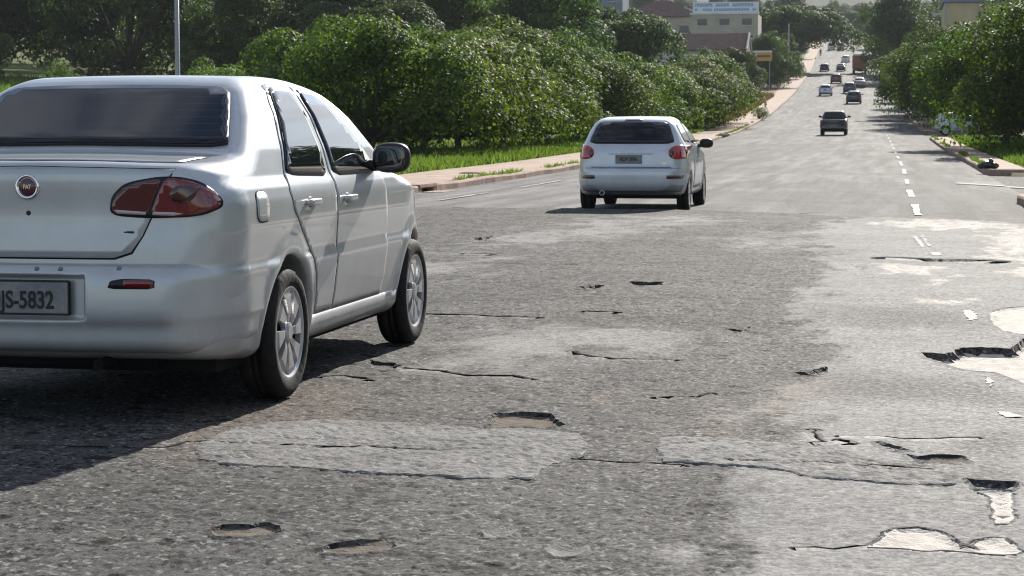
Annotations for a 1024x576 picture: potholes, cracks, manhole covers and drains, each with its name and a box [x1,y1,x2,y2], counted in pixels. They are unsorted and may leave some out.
pothole [482,412,568,430]
pothole [964,478,1023,492]
crack [564,351,675,362]
crack [562,458,682,468]
crack [402,368,532,380]
pothole [202,522,290,541]
pothole [867,527,1024,556]
pothole [917,337,1024,385]
pothole [314,539,404,557]
pothole [789,366,834,377]
pothole [977,492,1017,526]
